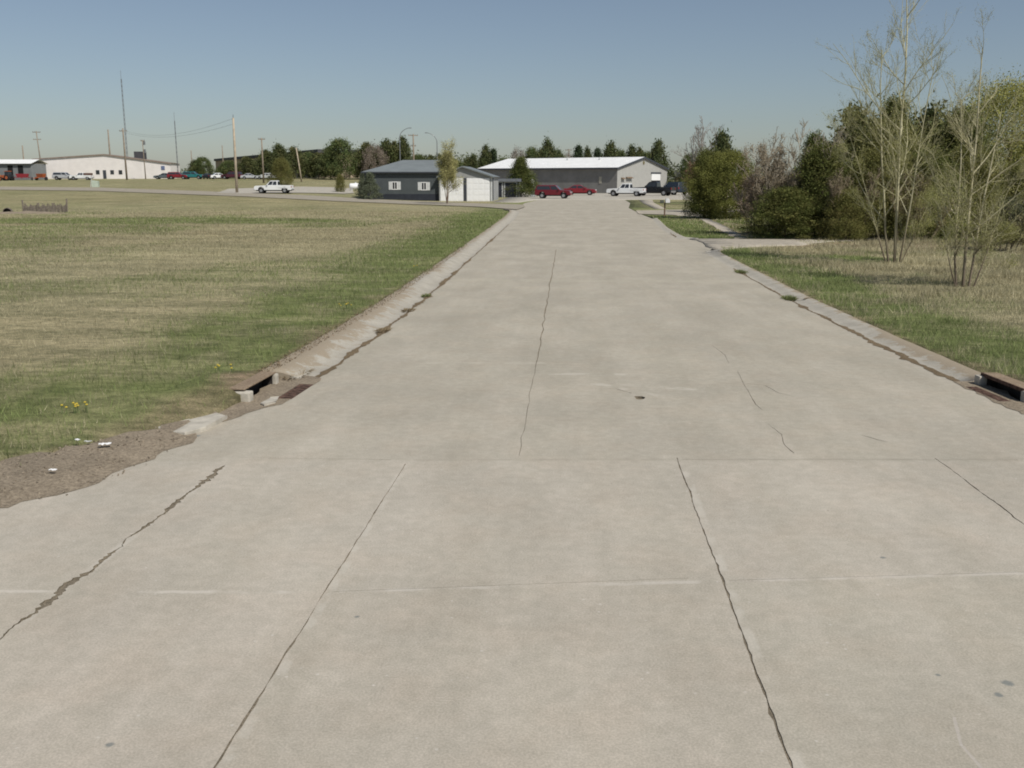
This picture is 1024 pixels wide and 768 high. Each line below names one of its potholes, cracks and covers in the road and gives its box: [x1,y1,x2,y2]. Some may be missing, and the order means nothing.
crack [0,466,224,640]
drain grate [229,372,313,402]
crack [935,458,1022,523]
crack [712,345,794,453]
crack [519,249,557,454]
crack [677,458,1008,768]
drain grate [967,372,1024,403]
